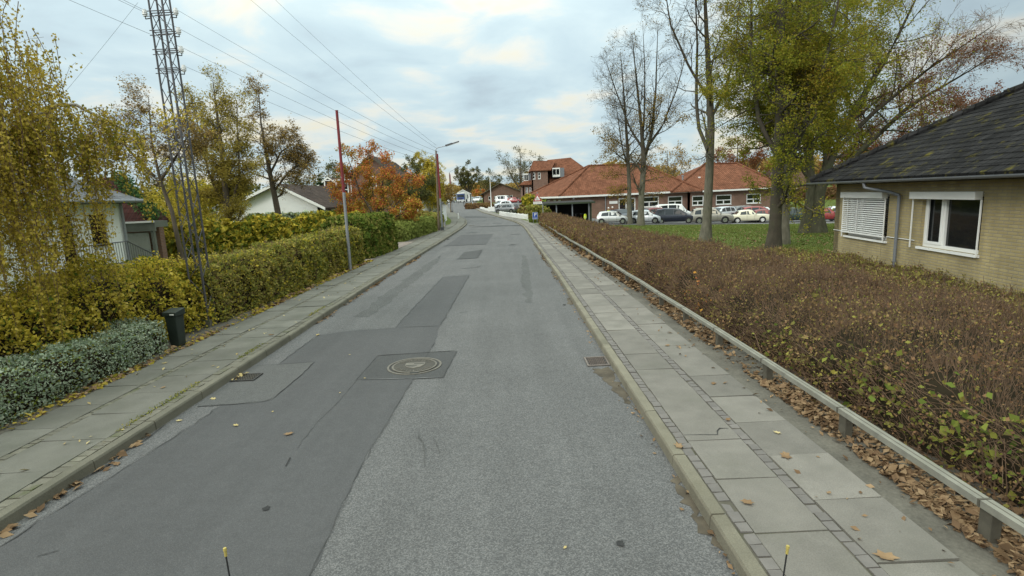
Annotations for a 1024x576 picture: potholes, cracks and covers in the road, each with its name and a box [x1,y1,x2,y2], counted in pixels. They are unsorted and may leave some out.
drain grate [230,373,263,382]
manhole cover [387,357,442,375]
drain grate [584,356,610,366]
